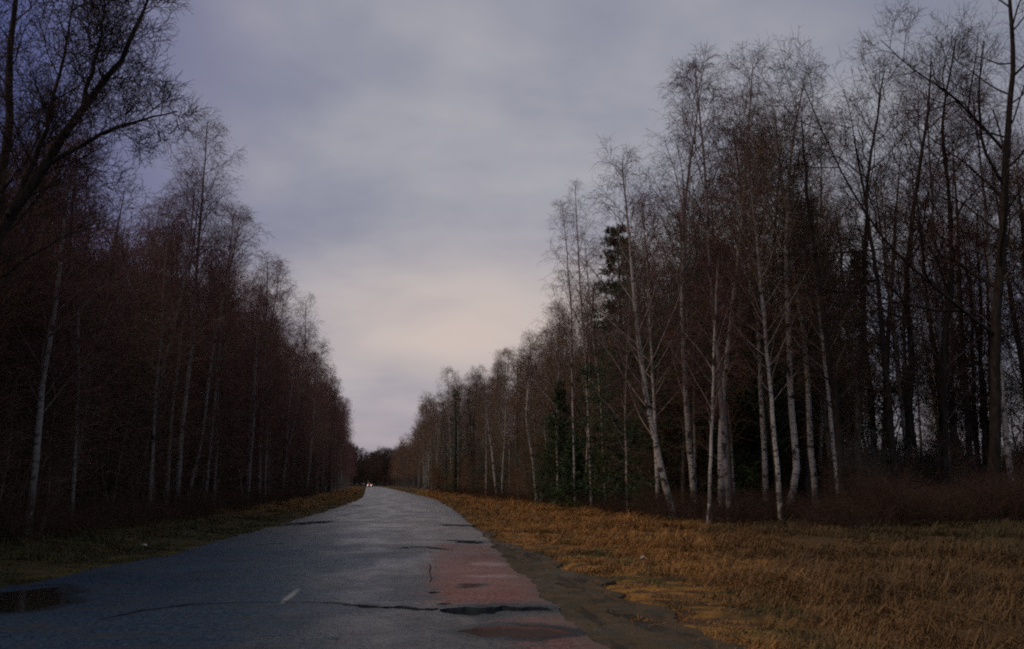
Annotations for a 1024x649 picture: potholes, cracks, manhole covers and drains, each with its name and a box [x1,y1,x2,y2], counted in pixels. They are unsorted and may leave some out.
pothole [457,626,572,638]
crack [103,602,439,619]
crack [412,546,449,582]
pothole [0,587,72,613]
